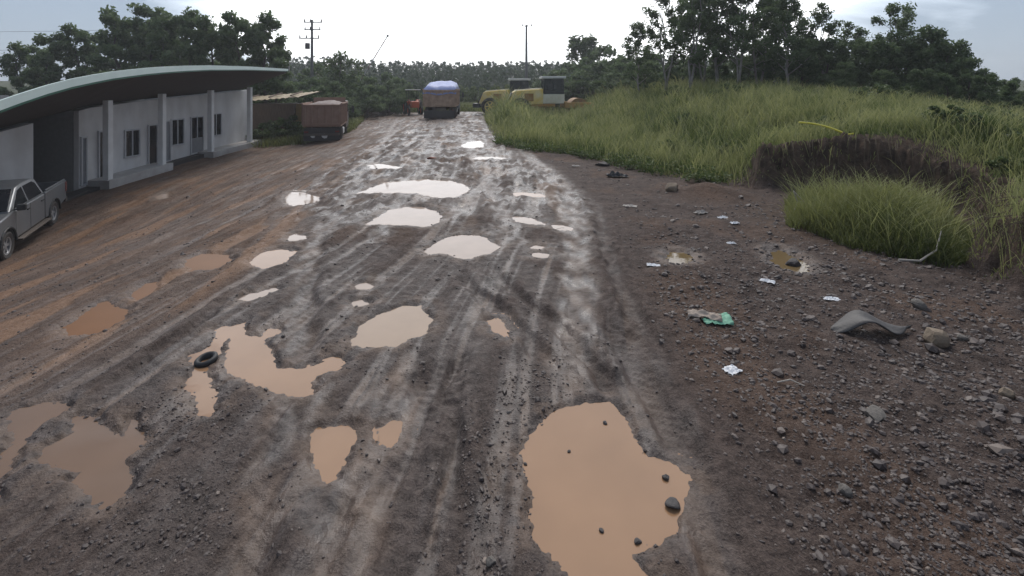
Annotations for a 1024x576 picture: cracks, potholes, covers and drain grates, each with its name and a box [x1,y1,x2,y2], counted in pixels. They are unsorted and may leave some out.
pothole [655,246,705,265]
pothole [365,408,418,455]
pothole [349,175,479,198]
pothole [455,139,493,149]
pothole [338,297,444,351]
pothole [47,294,143,339]
pothole [757,242,823,275]
pothole [0,386,163,519]
pothole [476,312,521,342]
pothole [174,247,247,275]
pothole [240,243,308,271]
pothole [357,202,451,228]
